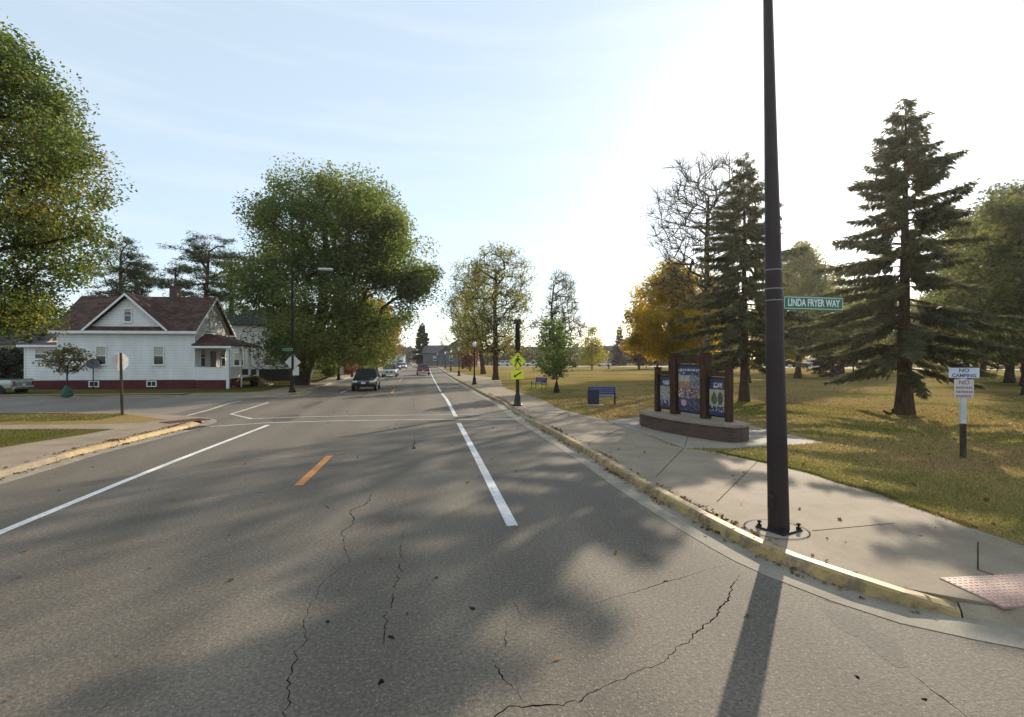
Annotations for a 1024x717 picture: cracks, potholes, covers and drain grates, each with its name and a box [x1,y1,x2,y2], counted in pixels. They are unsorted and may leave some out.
crack [282,486,371,716]
crack [383,480,410,644]
crack [493,565,739,717]
